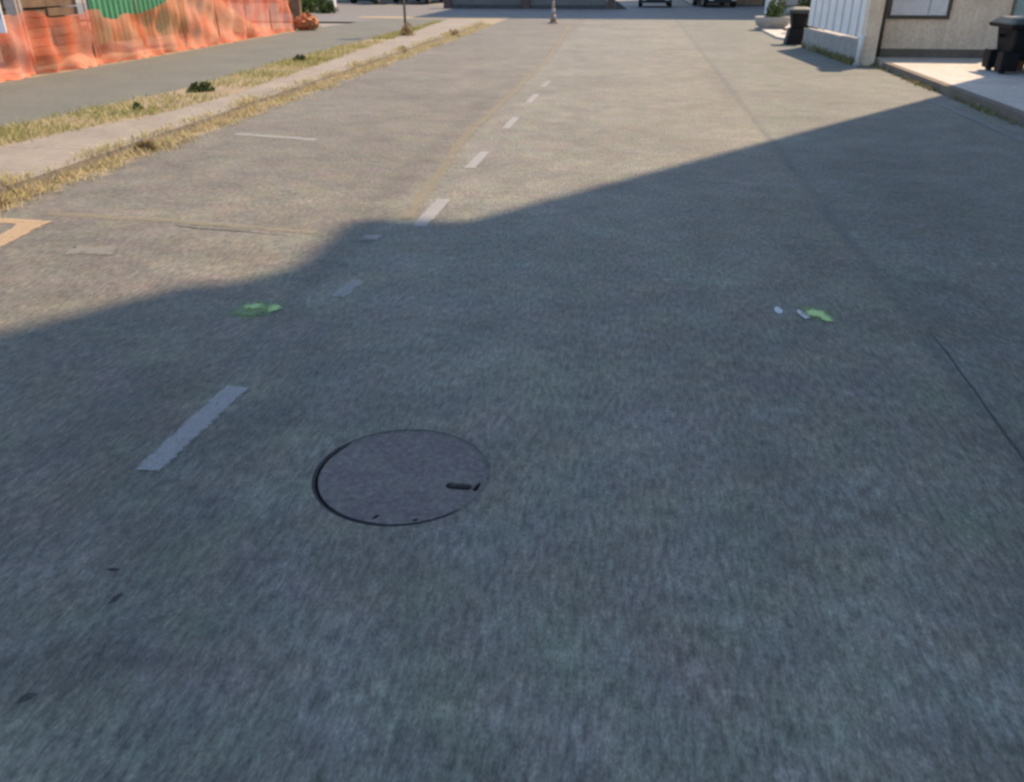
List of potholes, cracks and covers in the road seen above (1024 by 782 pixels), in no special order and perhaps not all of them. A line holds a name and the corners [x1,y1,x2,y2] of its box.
manhole cover [312,429,490,527]
